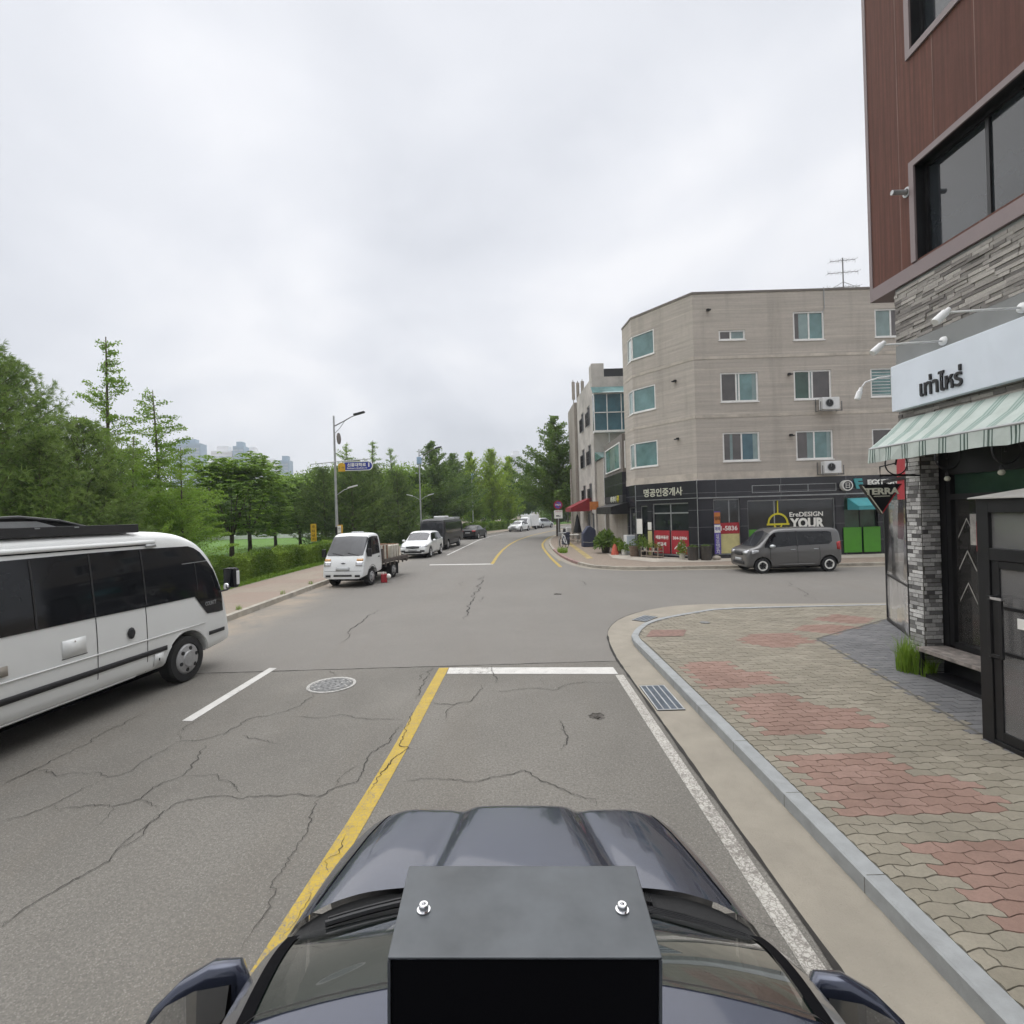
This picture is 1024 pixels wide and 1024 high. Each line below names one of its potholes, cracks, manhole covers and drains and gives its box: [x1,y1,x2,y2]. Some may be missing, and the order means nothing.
manhole cover [306,677,356,693]
drain grate [639,685,685,711]
crack [2,670,602,944]
